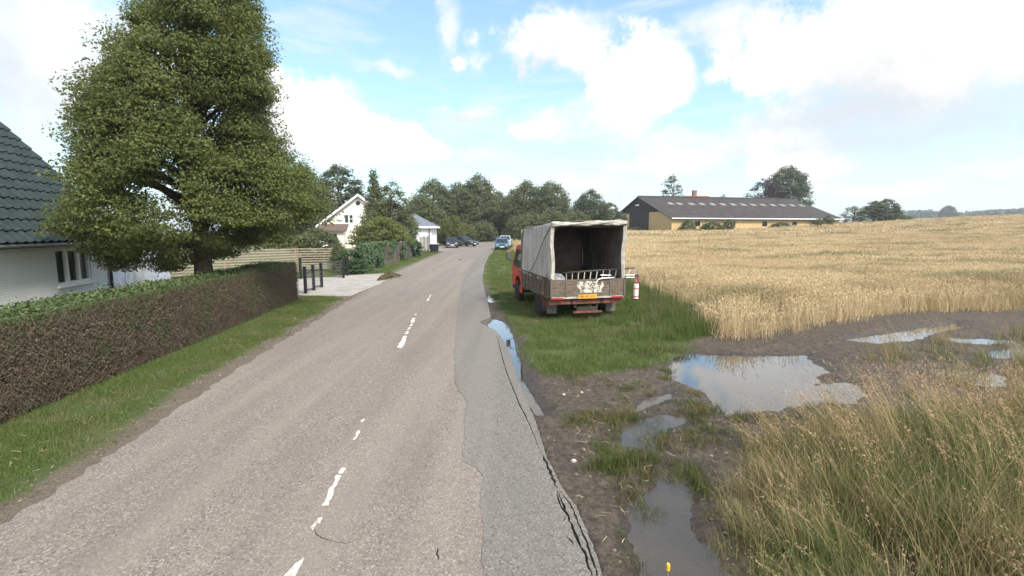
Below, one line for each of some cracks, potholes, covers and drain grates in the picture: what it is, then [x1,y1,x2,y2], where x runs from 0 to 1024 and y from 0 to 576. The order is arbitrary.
crack [498,342,598,576]
